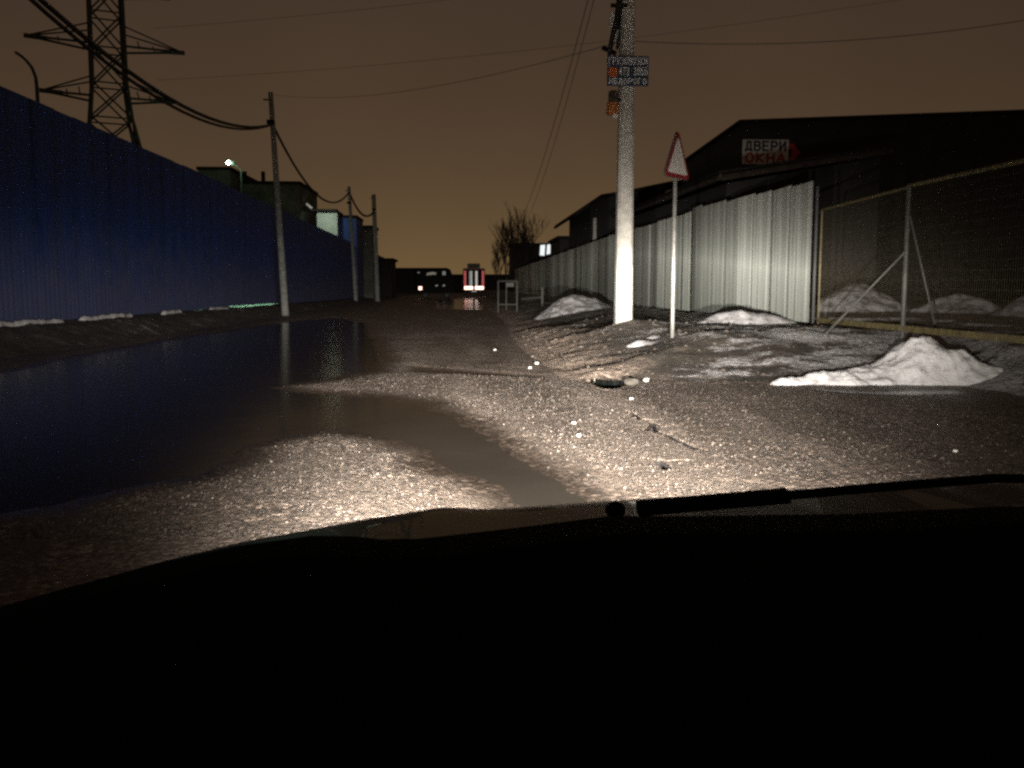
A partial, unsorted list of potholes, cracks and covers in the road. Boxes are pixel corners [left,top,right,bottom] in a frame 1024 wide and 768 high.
pothole [581,373,632,391]
crack [627,411,705,470]
